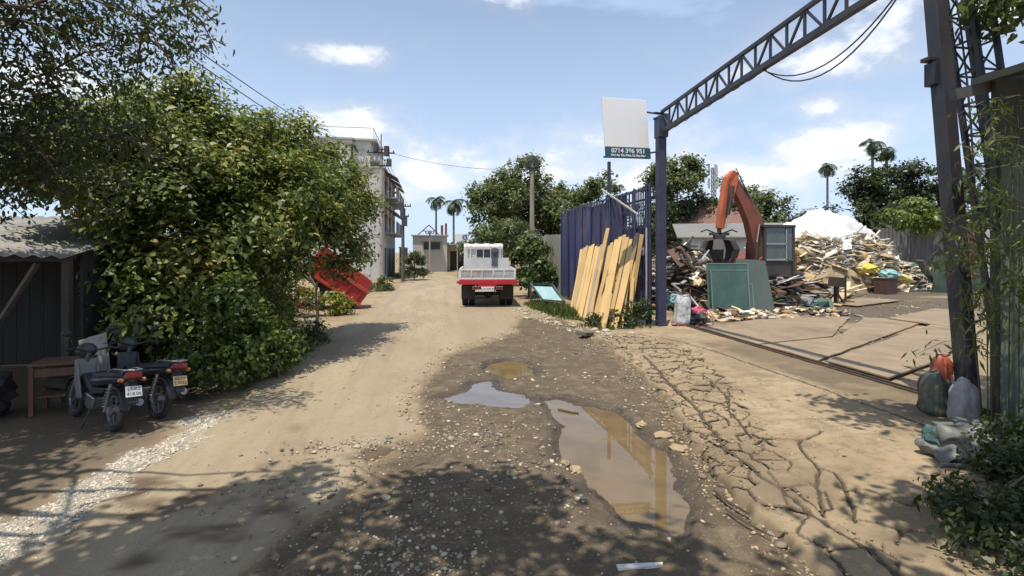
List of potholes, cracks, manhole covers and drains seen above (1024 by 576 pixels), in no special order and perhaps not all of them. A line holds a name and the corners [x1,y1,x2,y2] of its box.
pothole [536,393,711,543]
pothole [472,358,547,381]
pothole [426,377,543,413]
crack [603,336,927,576]
